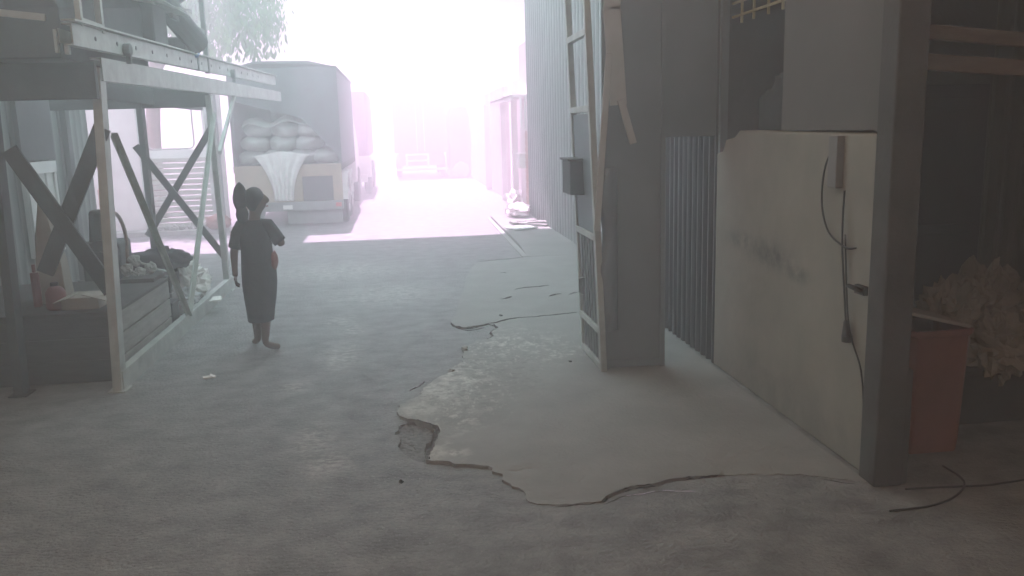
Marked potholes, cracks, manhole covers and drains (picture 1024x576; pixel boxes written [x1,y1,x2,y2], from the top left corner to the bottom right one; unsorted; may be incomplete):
crack [451,272,578,339]
pothole [395,419,440,463]
crack [553,475,718,508]
